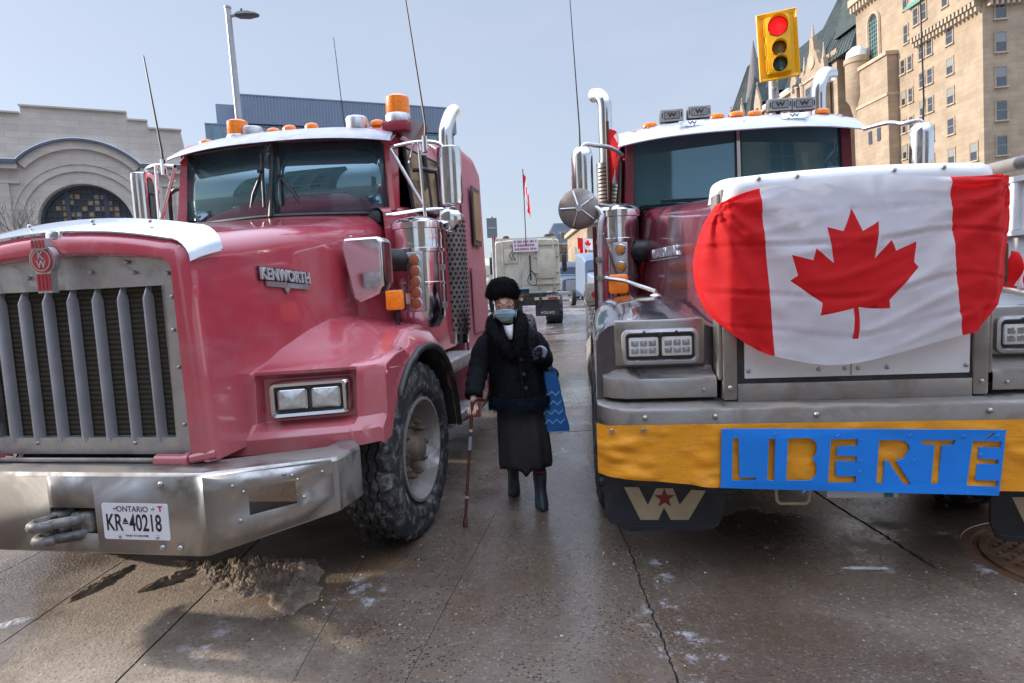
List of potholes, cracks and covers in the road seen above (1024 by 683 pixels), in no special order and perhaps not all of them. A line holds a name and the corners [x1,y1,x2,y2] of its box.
crack [618,527,679,683]
manhole cover [960,523,1024,584]
